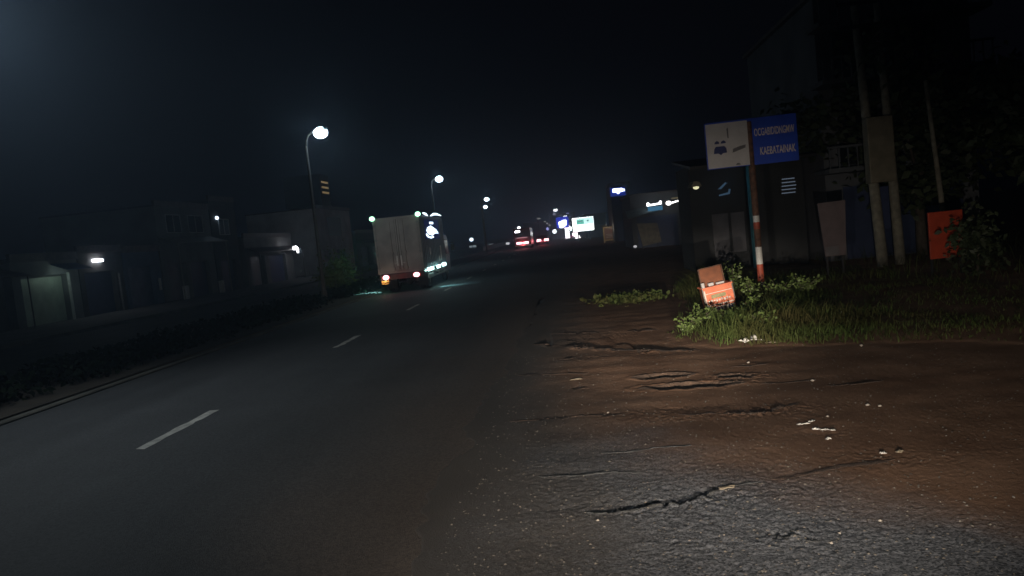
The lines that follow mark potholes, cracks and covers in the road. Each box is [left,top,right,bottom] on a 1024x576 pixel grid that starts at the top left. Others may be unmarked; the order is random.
crack [583,459,894,515]
crack [519,329,696,389]
crack [679,402,800,416]
